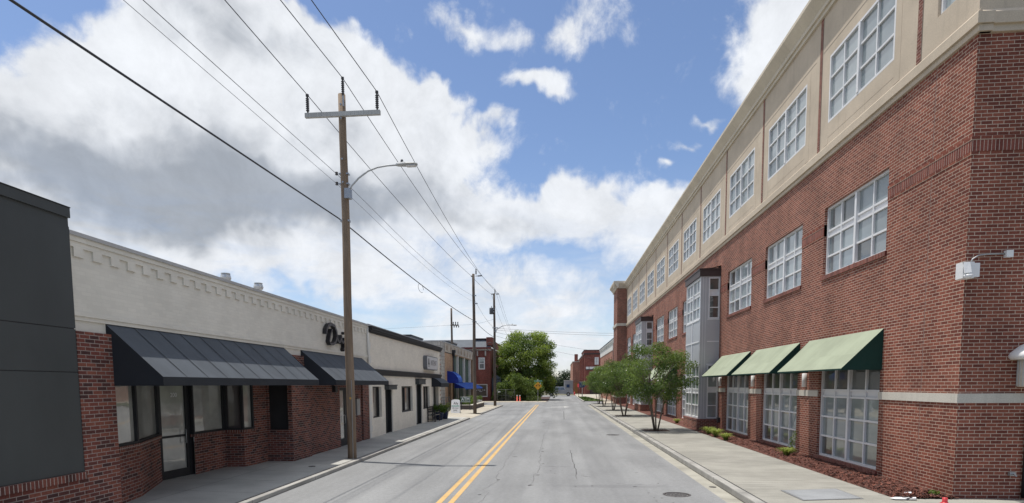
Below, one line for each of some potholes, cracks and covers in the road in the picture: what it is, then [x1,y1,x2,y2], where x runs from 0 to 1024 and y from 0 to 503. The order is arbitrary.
crack [480,411,588,502]
